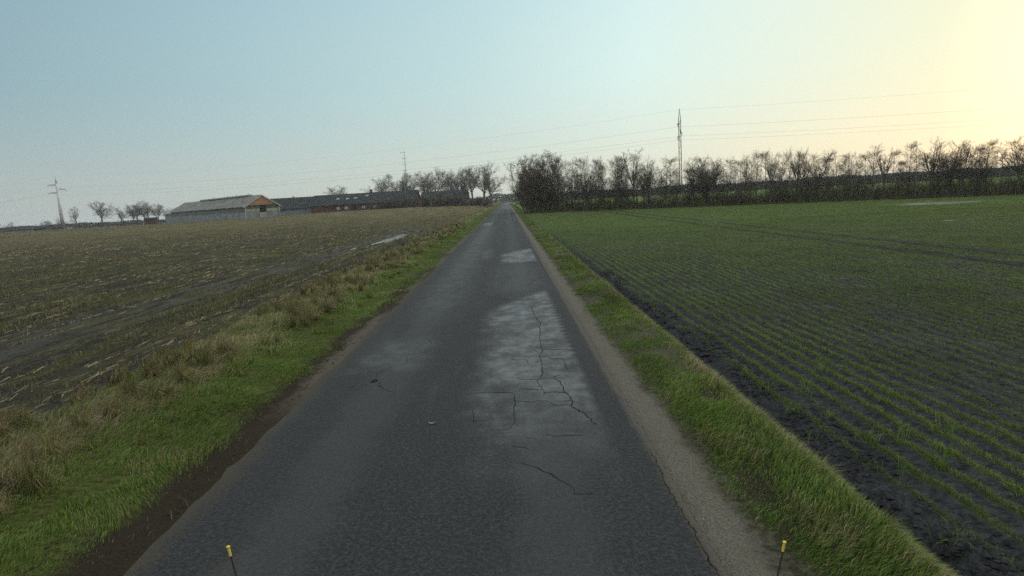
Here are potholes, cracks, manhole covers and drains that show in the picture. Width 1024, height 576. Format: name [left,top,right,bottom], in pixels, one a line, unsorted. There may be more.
crack [472,299,595,495]
crack [650,451,719,576]
